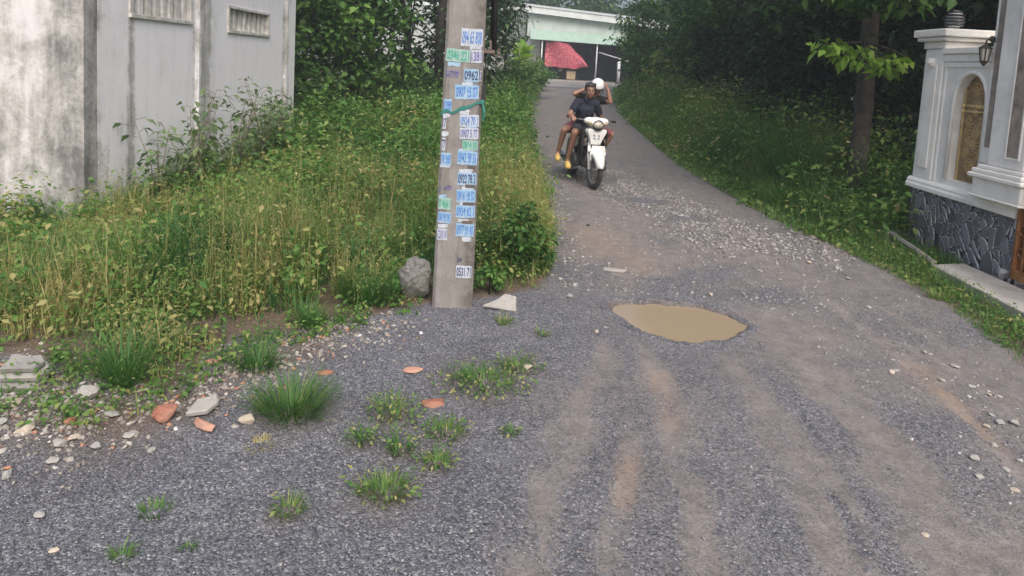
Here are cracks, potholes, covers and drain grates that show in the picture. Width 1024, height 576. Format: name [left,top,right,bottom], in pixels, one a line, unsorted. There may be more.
pothole [597,297,759,348]
